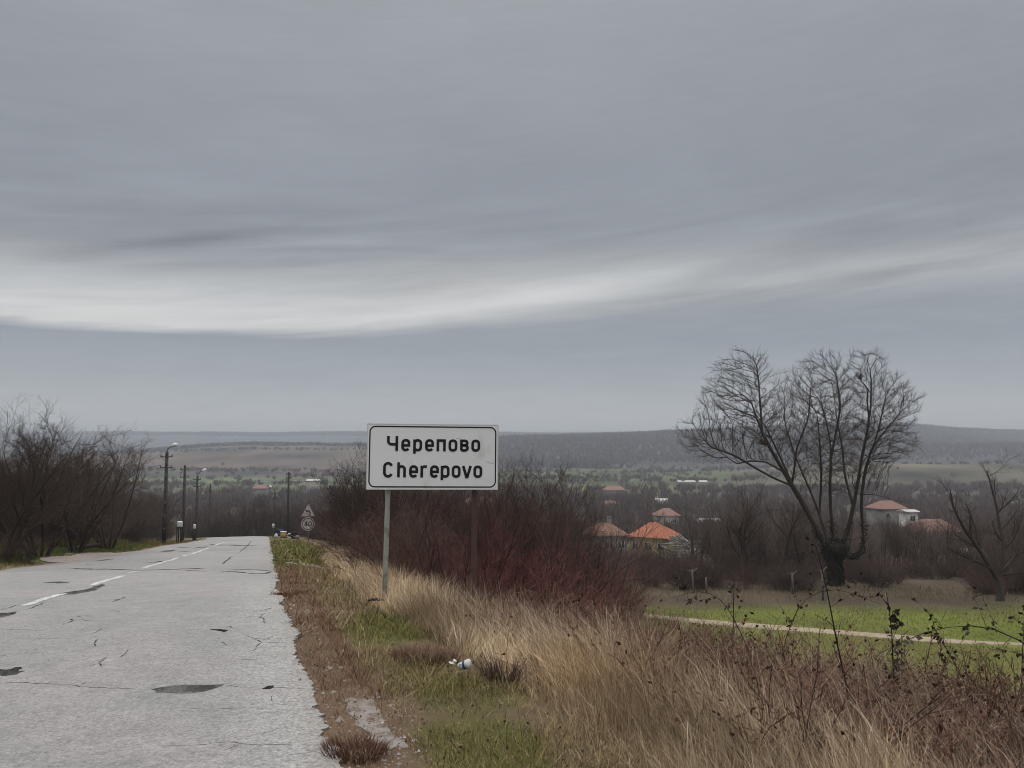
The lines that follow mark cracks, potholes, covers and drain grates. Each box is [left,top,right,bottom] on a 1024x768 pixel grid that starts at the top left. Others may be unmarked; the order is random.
crack [222,608,285,660]
crack [150,541,255,564]
pothole [0,667,24,676]
pothole [152,684,224,694]
